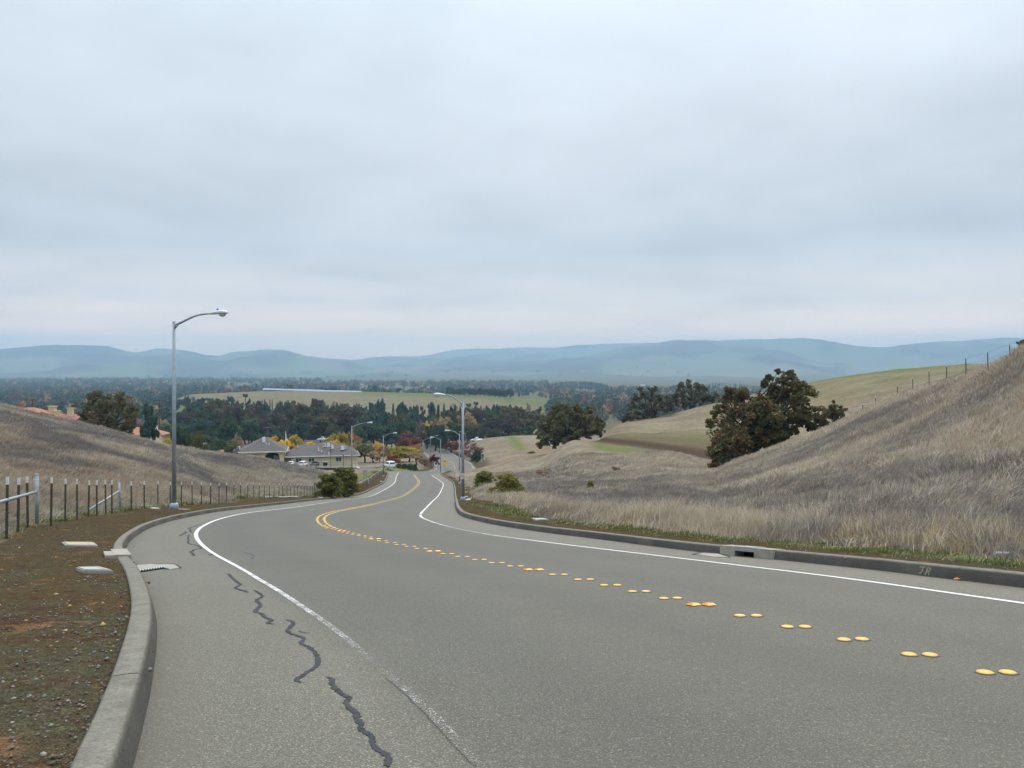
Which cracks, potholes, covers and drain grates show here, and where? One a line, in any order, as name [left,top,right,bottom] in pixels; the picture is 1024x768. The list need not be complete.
drain grate [694,545,786,559]
